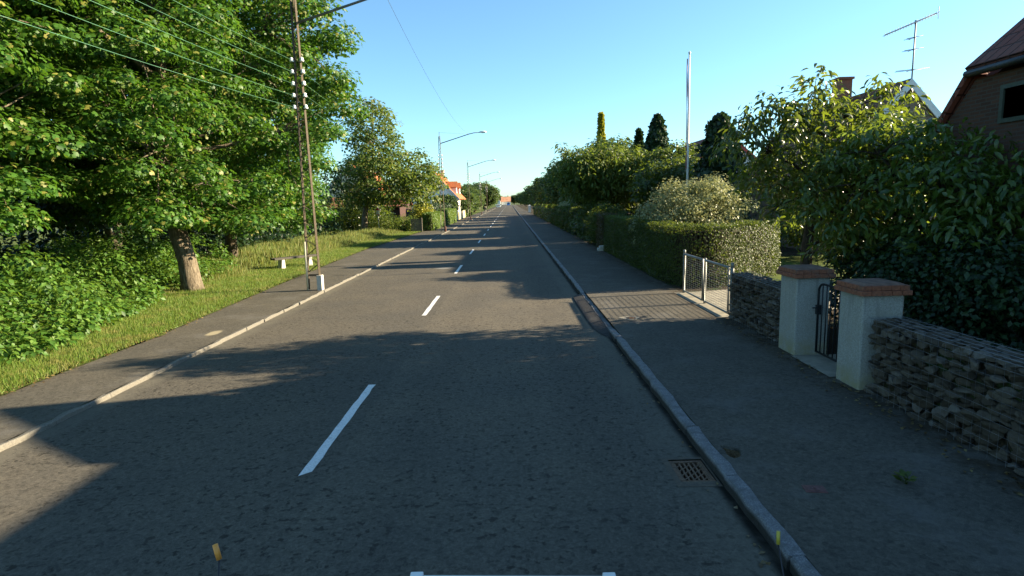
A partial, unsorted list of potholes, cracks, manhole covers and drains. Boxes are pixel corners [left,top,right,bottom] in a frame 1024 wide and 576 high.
drain grate [661,457,722,487]
